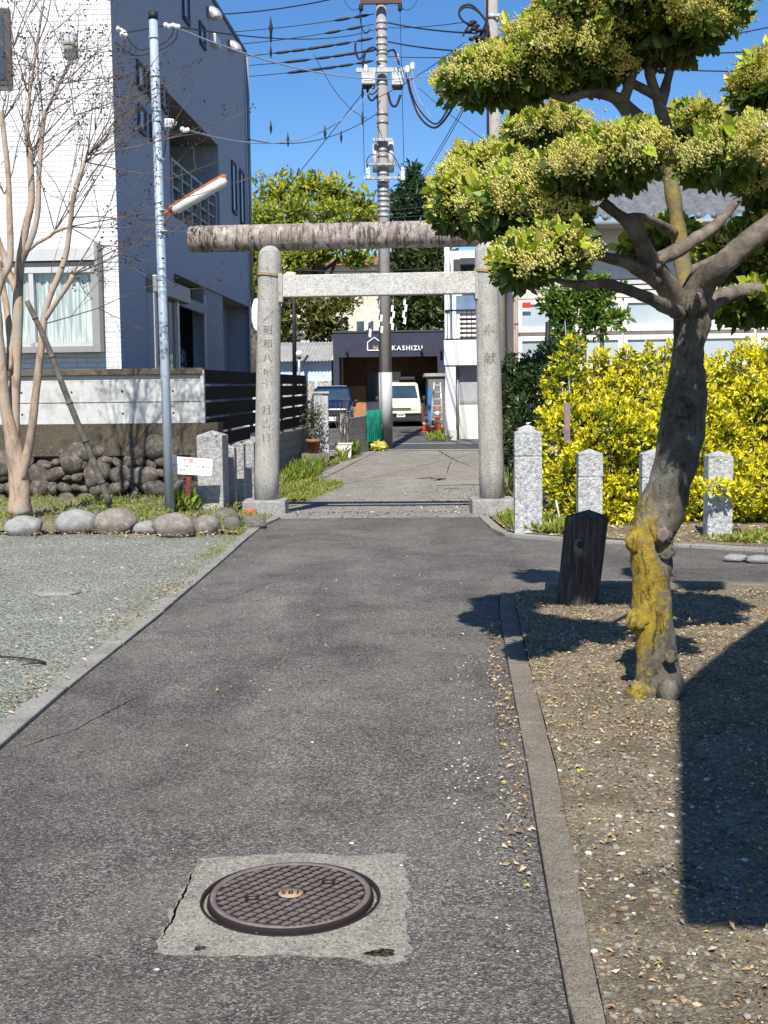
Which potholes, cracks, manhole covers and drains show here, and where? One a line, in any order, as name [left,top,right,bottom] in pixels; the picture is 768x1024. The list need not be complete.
crack [18,697,138,750]
manhole cover [200,862,381,937]
crack [161,871,194,940]
crack [416,451,471,489]
